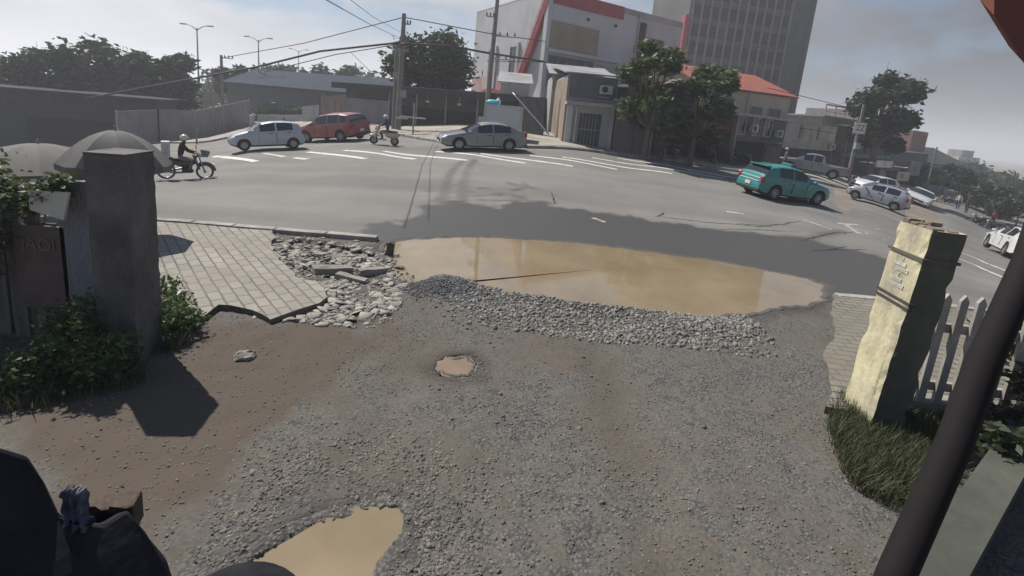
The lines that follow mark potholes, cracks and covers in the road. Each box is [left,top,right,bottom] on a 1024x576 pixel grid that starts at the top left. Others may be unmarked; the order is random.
pothole [275,237,386,282]
pothole [435,355,478,379]
pothole [232,495,417,576]
pothole [372,236,830,318]
crack [657,213,861,251]
